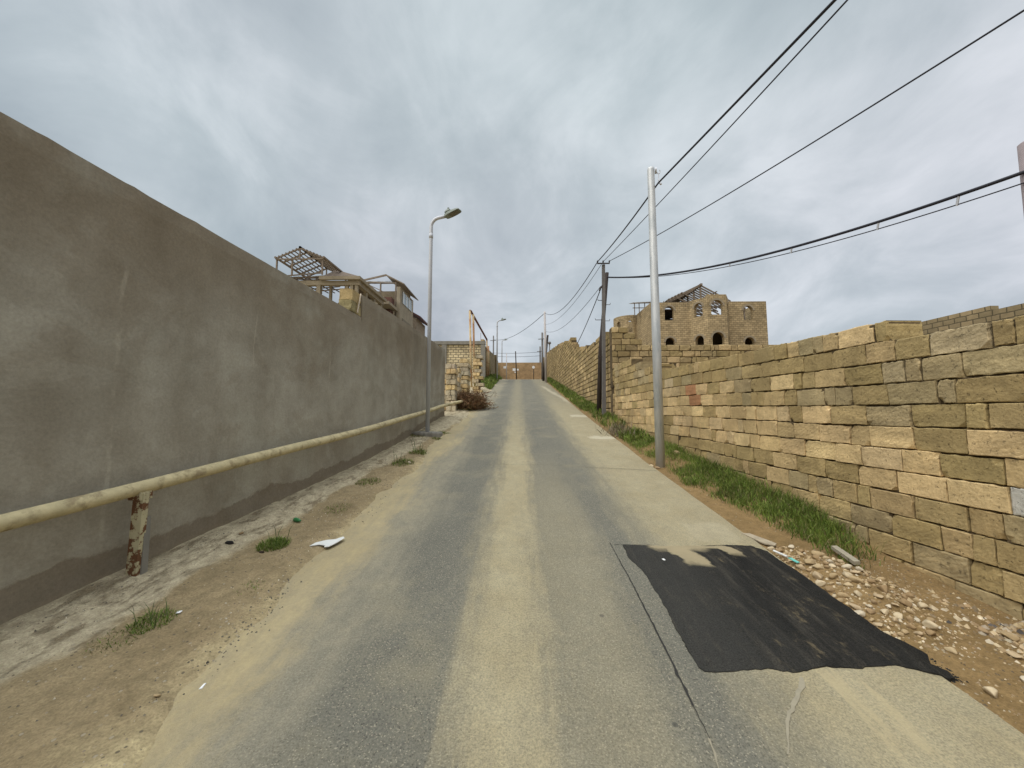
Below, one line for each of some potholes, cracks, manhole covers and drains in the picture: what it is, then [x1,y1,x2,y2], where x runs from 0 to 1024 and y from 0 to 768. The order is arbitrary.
crack [785,676,805,755]
